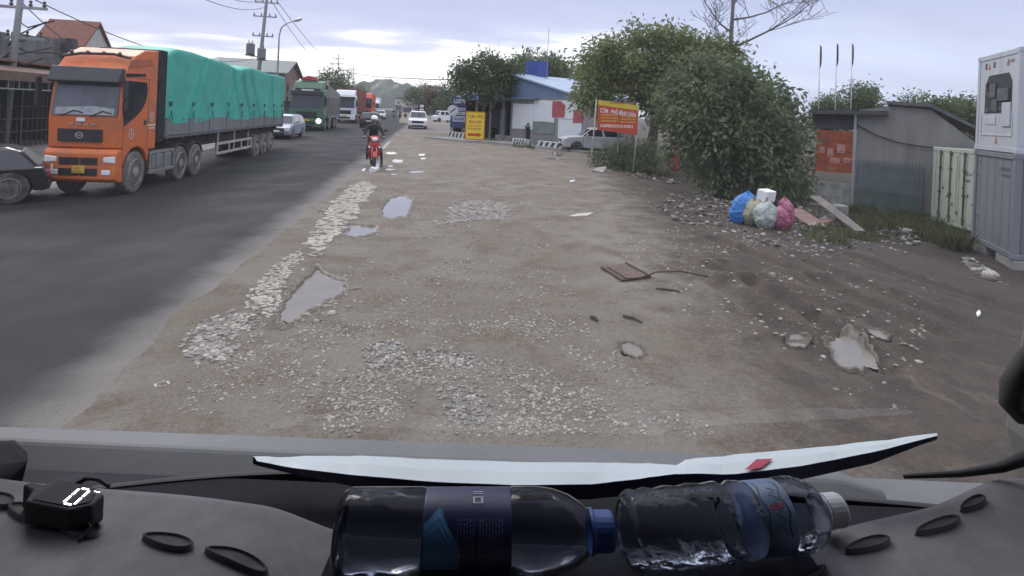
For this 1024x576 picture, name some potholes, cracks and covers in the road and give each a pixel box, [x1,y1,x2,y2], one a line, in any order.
pothole [865,325,892,342]
pothole [818,323,884,376]
pothole [340,222,382,239]
pothole [617,340,648,359]
pothole [378,194,416,222]
pothole [784,331,813,350]
pothole [271,262,353,330]
